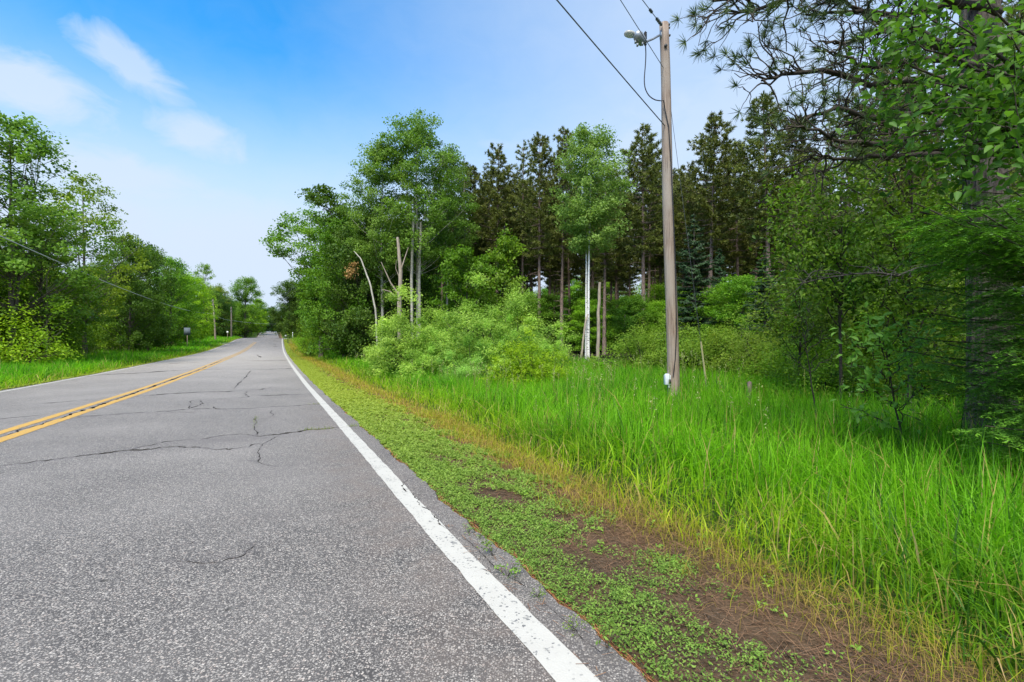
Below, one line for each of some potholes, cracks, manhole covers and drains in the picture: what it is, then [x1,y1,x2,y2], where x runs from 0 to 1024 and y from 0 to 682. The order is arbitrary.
crack [181,545,255,564]
crack [3,344,335,466]
